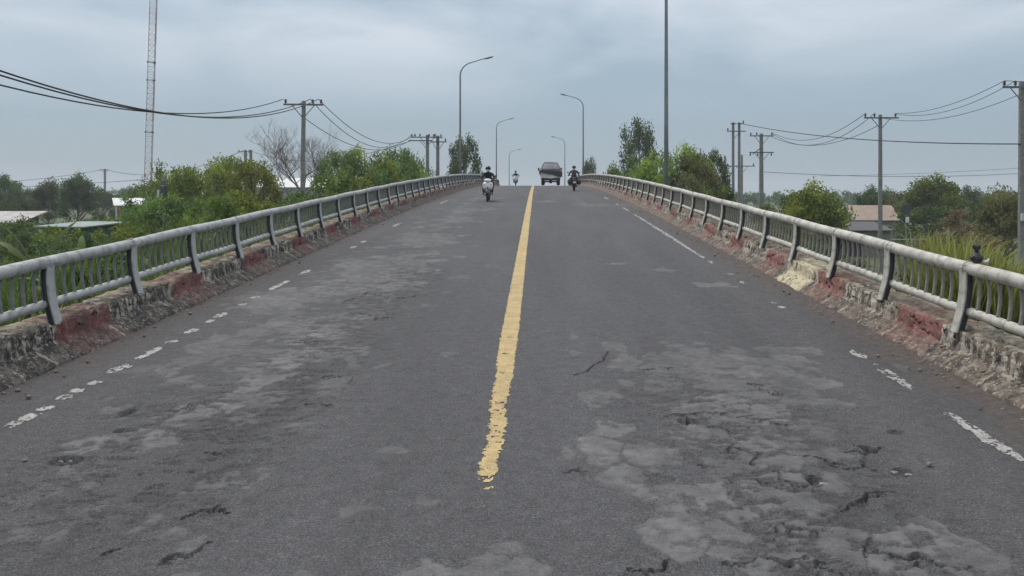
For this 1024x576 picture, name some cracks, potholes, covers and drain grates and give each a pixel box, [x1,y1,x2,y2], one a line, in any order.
crack [718,520,838,575]
crack [96,548,123,559]
pothole [45,453,86,467]
crack [573,351,610,376]
crack [154,541,213,566]
crack [663,383,900,513]
crack [860,535,975,571]
crack [180,504,234,520]
